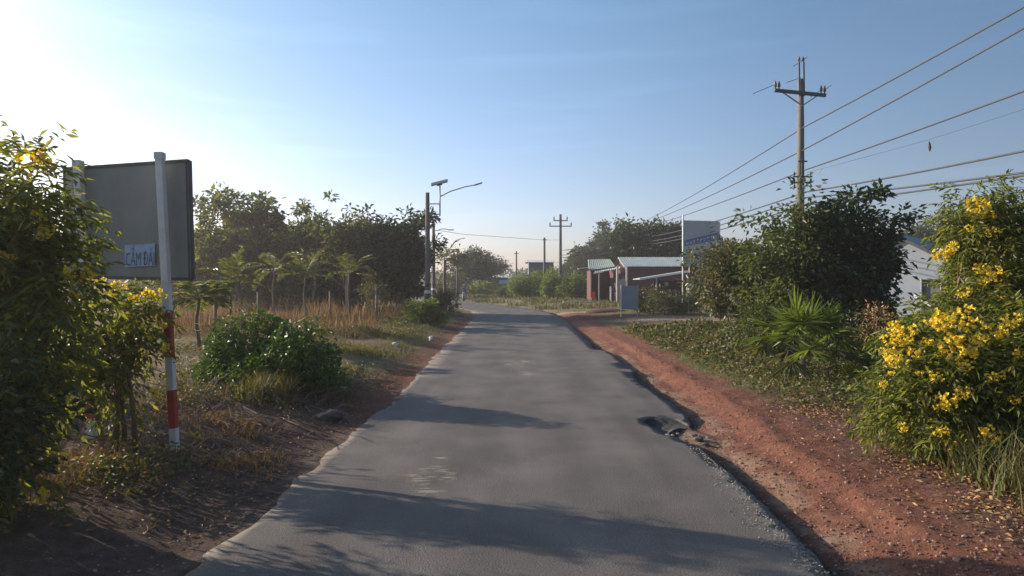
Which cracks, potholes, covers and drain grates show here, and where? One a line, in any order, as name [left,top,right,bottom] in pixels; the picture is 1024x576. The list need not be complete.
pothole [644,417,692,437]
